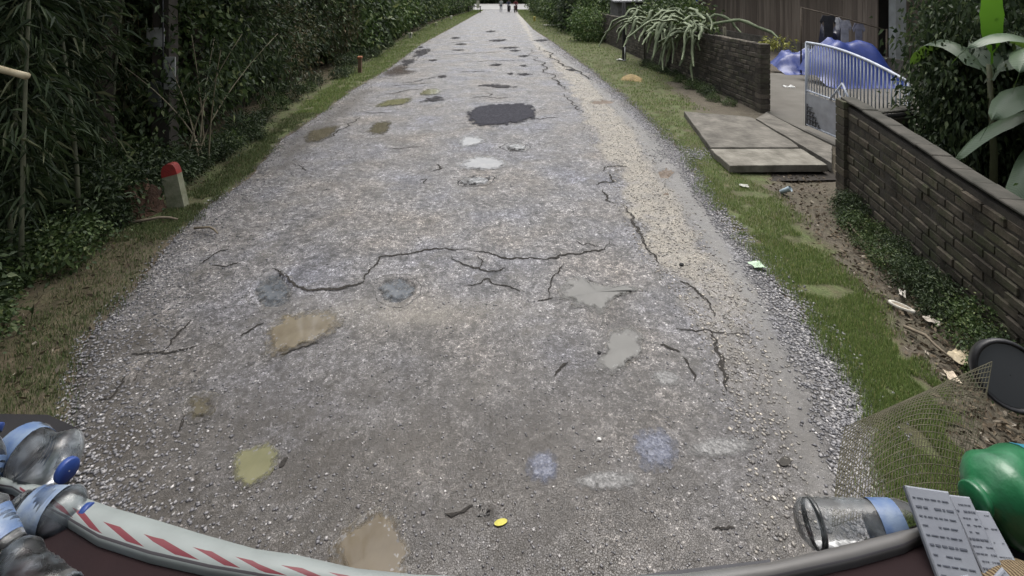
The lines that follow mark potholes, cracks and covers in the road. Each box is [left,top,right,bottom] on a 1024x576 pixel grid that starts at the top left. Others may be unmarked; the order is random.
pothole [331,506,410,574]
pothole [590,328,643,375]
crack [660,280,747,390]
crack [452,41,592,119]
crack [131,320,197,355]
pothole [265,309,344,357]
pothole [558,276,643,314]
pothole [383,65,418,76]
pothole [457,175,495,187]
crack [273,165,659,301]
